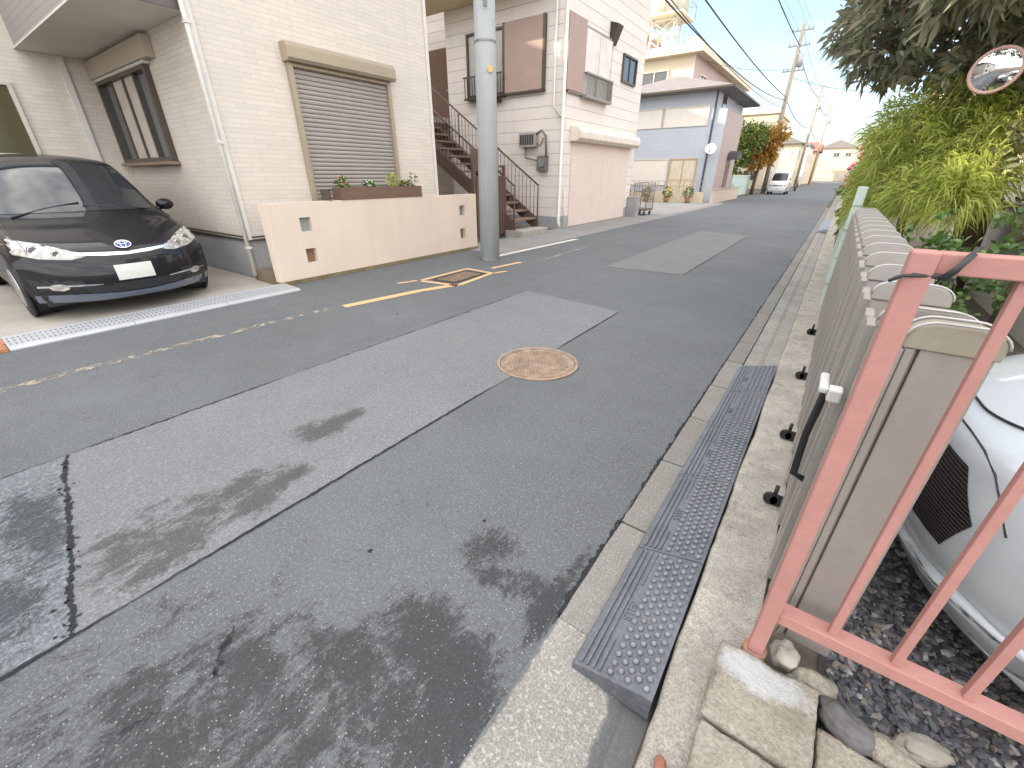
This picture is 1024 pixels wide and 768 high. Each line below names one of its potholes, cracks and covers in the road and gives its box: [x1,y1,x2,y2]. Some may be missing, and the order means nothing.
manhole cover [497,347,578,381]
crack [208,625,235,681]
